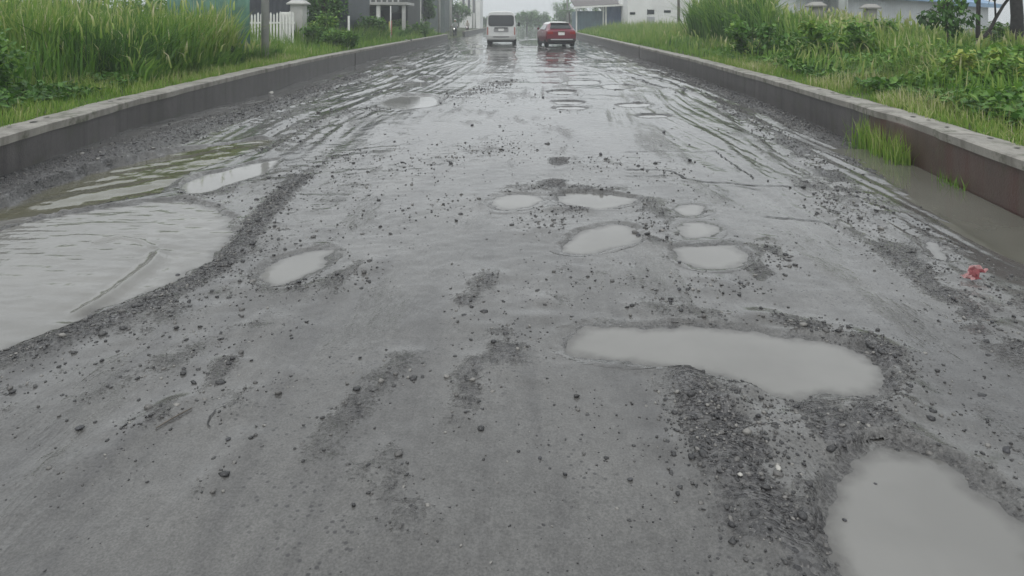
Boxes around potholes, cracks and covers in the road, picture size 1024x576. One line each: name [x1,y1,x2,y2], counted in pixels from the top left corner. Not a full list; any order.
pothole [665,218,728,241]
pothole [548,320,908,403]
pothole [0,196,241,351]
pothole [250,243,343,288]
pothole [484,191,548,211]
pothole [371,93,449,110]
pothole [795,435,1024,576]
pothole [667,201,717,218]
pothole [549,188,644,210]
pothole [549,220,648,257]
